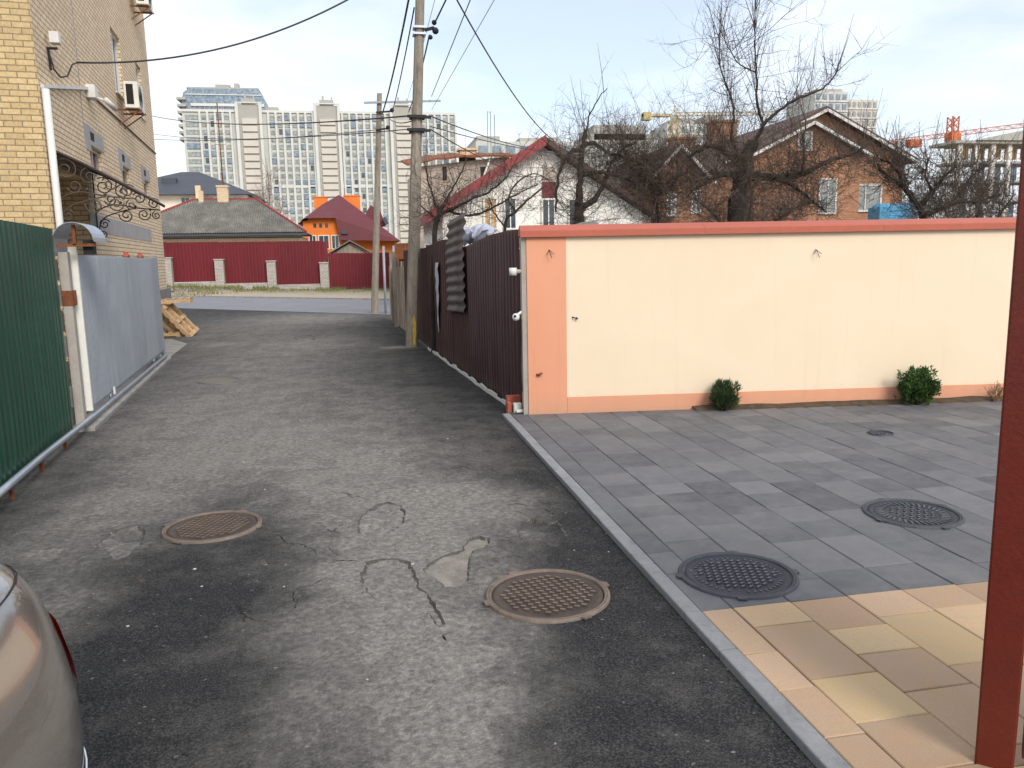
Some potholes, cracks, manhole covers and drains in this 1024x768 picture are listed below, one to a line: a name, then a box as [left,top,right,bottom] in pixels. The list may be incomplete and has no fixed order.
manhole cover [862,498,965,529]
manhole cover [483,569,610,624]
manhole cover [676,550,800,601]
manhole cover [161,510,262,544]
pothole [422,536,490,587]
crack [270,524,357,610]
